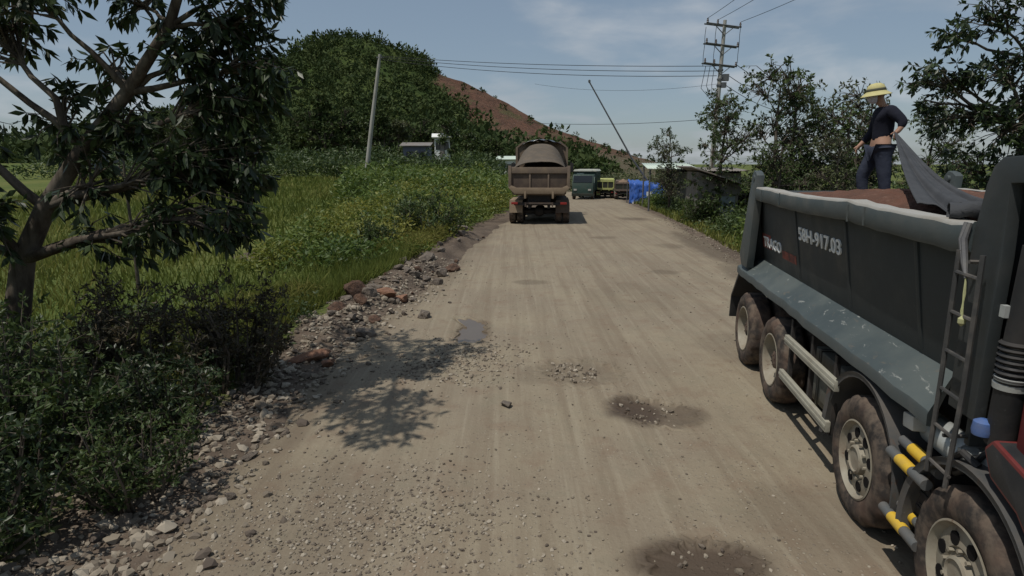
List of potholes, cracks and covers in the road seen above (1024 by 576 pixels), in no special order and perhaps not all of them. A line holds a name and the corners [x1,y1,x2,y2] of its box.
pothole [605,393,705,432]
pothole [530,356,631,391]
pothole [451,315,493,346]
pothole [634,534,772,576]
